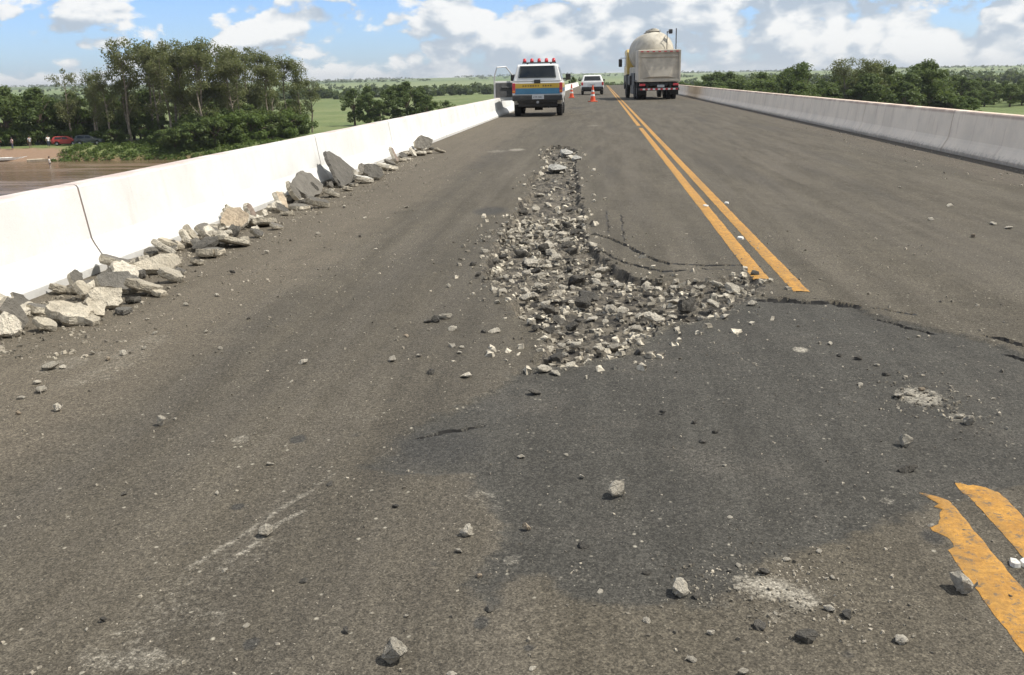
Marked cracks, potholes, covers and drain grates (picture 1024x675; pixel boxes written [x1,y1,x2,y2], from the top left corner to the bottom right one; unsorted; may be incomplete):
crack [986,335,1024,362]
pothole [482,145,766,368]
crack [595,210,761,273]
crack [413,425,486,440]
crack [755,297,937,335]
